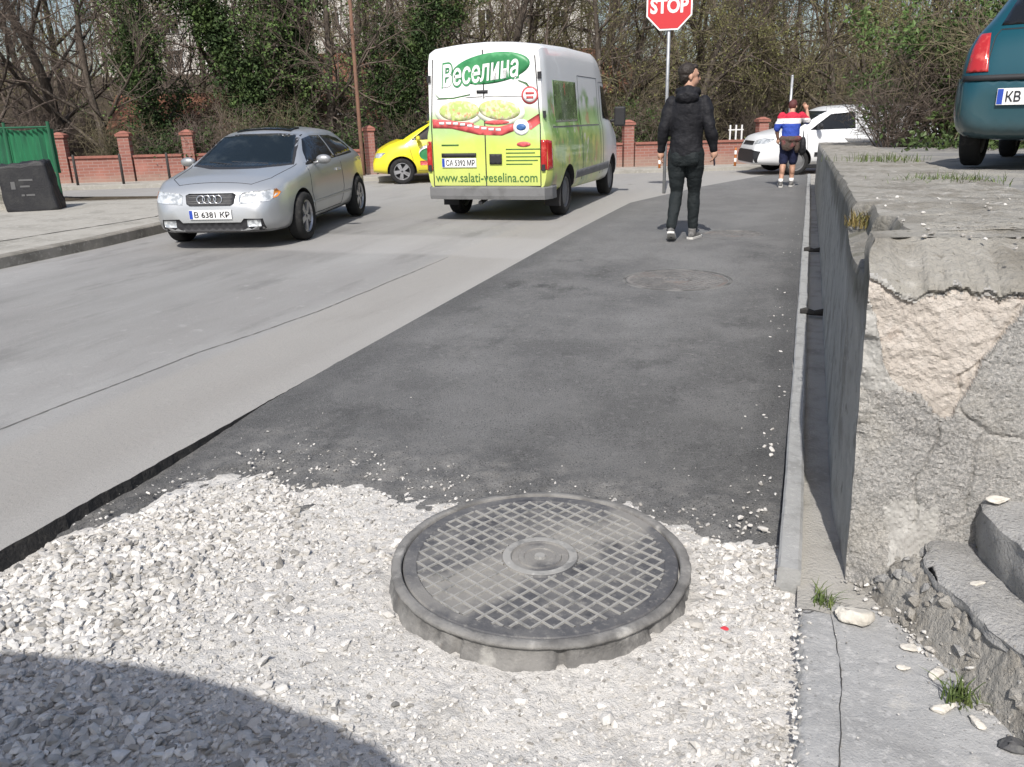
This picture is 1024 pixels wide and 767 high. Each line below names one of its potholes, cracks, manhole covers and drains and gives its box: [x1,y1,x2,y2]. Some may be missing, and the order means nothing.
manhole cover [389,491,692,672]
manhole cover [622,269,733,291]
crack [830,612,842,767]
